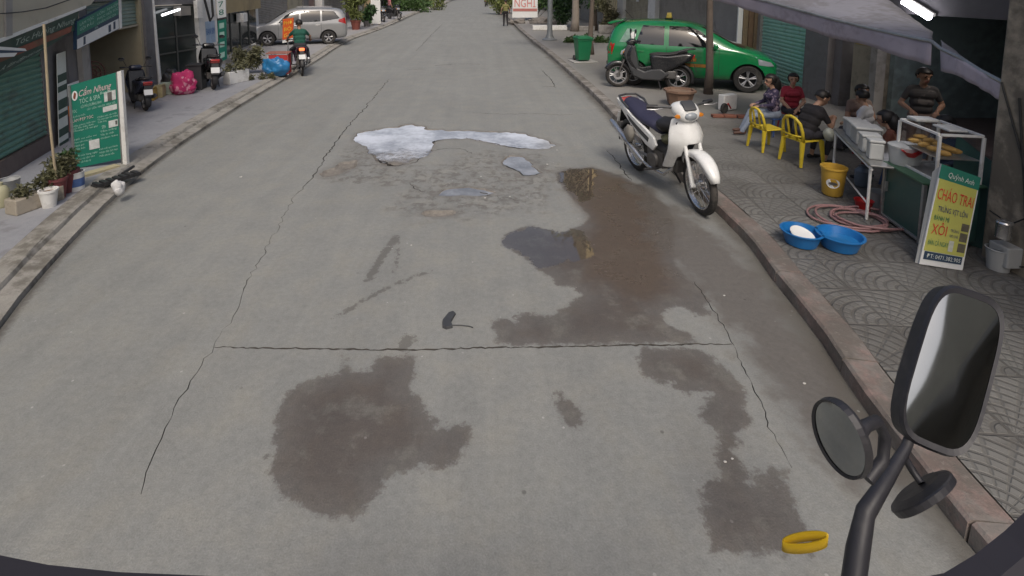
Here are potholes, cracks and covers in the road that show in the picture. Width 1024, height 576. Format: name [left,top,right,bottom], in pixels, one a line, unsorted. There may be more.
pothole [501,155,542,176]
pothole [438,187,496,196]
crack [694,282,792,468]
pothole [353,124,556,166]
crack [141,34,432,493]
